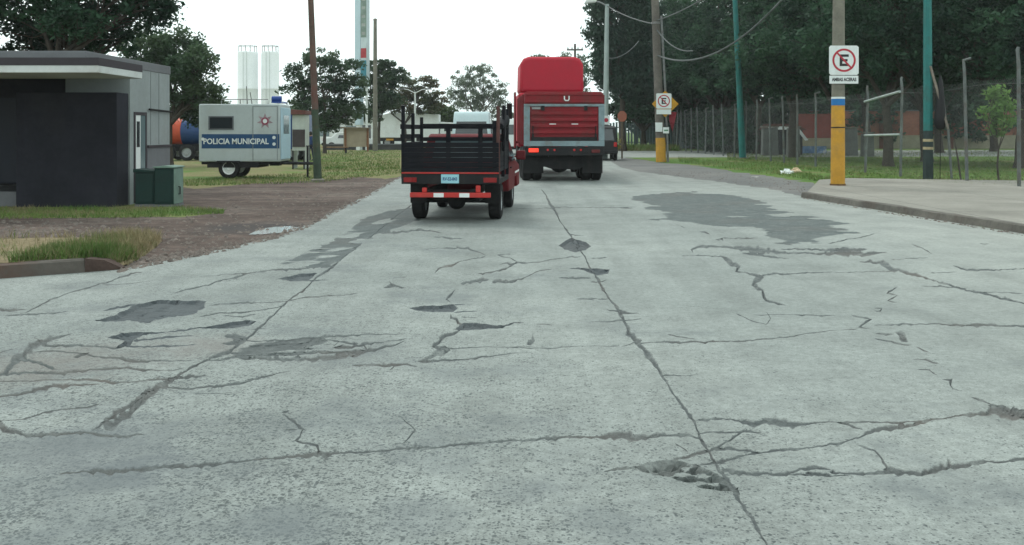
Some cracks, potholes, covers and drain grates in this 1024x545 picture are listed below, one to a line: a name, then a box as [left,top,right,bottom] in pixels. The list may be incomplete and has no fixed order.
pothole [455,322,523,331]
pothole [604,459,739,495]
pothole [410,304,475,313]
crack [0,225,1024,477]
pothole [95,300,207,323]
pothole [559,238,591,252]
